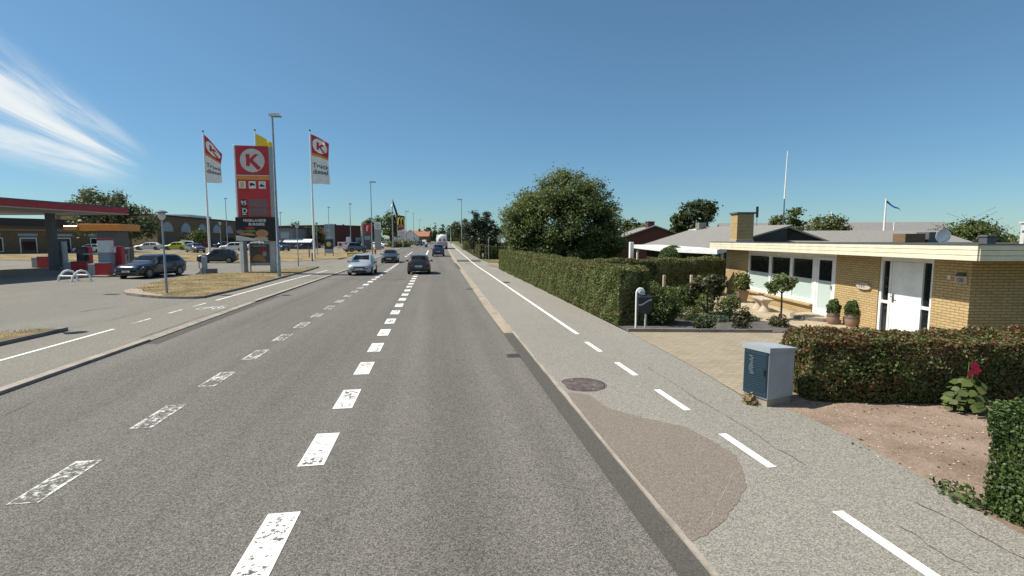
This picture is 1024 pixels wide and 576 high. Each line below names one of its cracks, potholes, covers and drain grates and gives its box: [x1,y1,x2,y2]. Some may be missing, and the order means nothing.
crack [703,467,736,532]
manhole cover [561,378,607,392]
